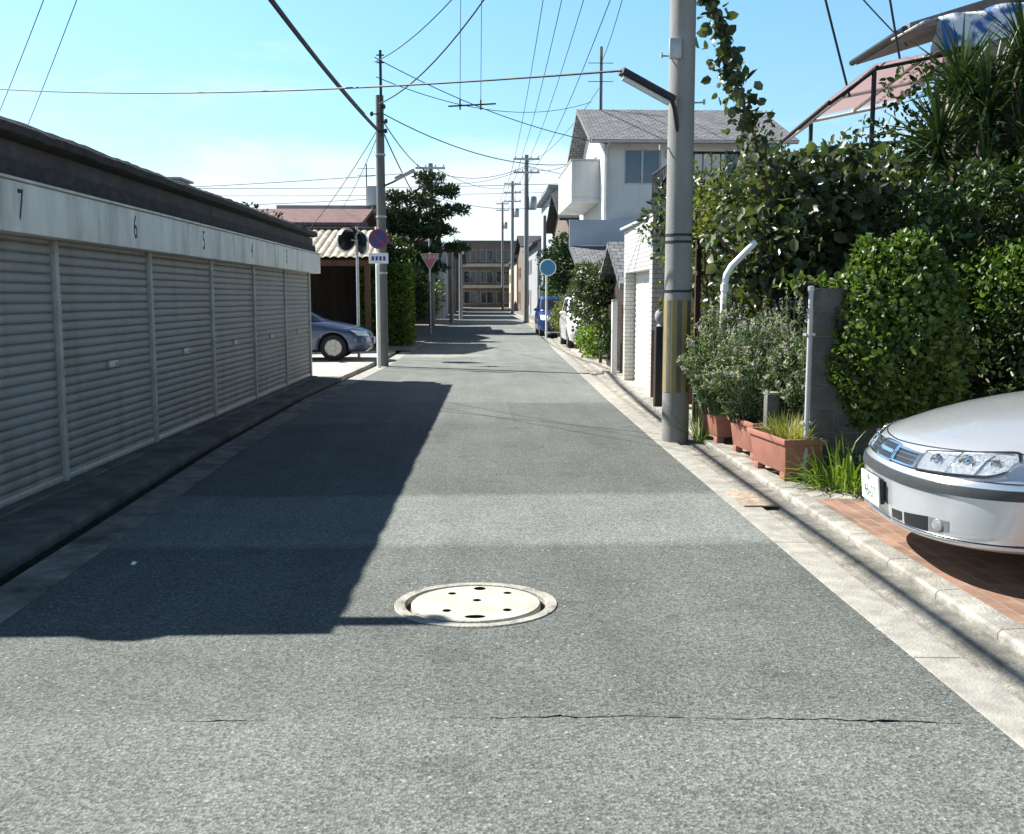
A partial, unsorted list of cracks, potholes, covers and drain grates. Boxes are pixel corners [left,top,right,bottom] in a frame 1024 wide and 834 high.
manhole cover [394,582,558,628]
crack [497,715,932,723]
